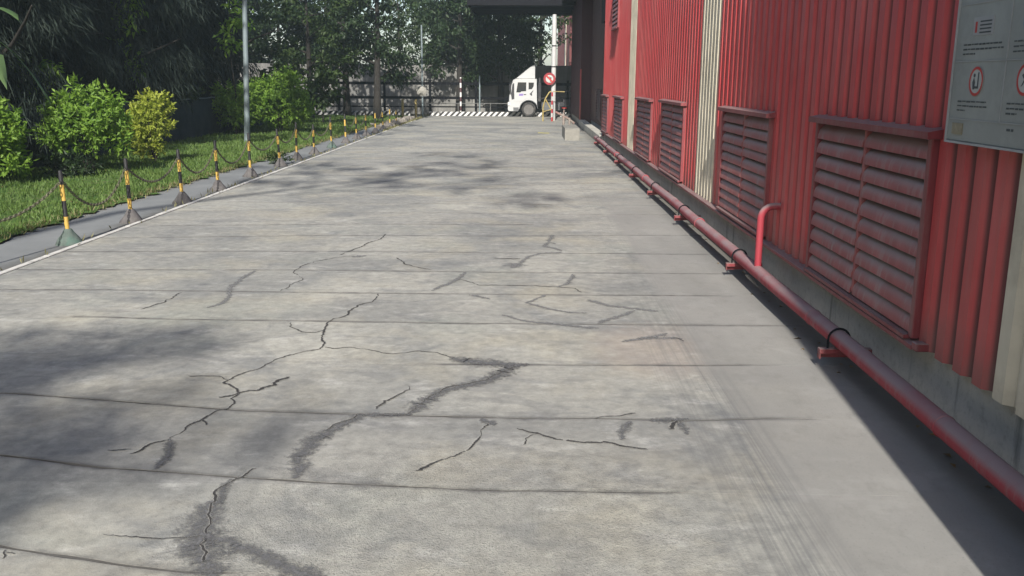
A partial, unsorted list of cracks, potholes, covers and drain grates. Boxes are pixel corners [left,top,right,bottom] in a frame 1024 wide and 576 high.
crack [517,413,689,450]
crack [281,234,683,342]
crack [207,271,255,308]
crack [104,294,530,576]
